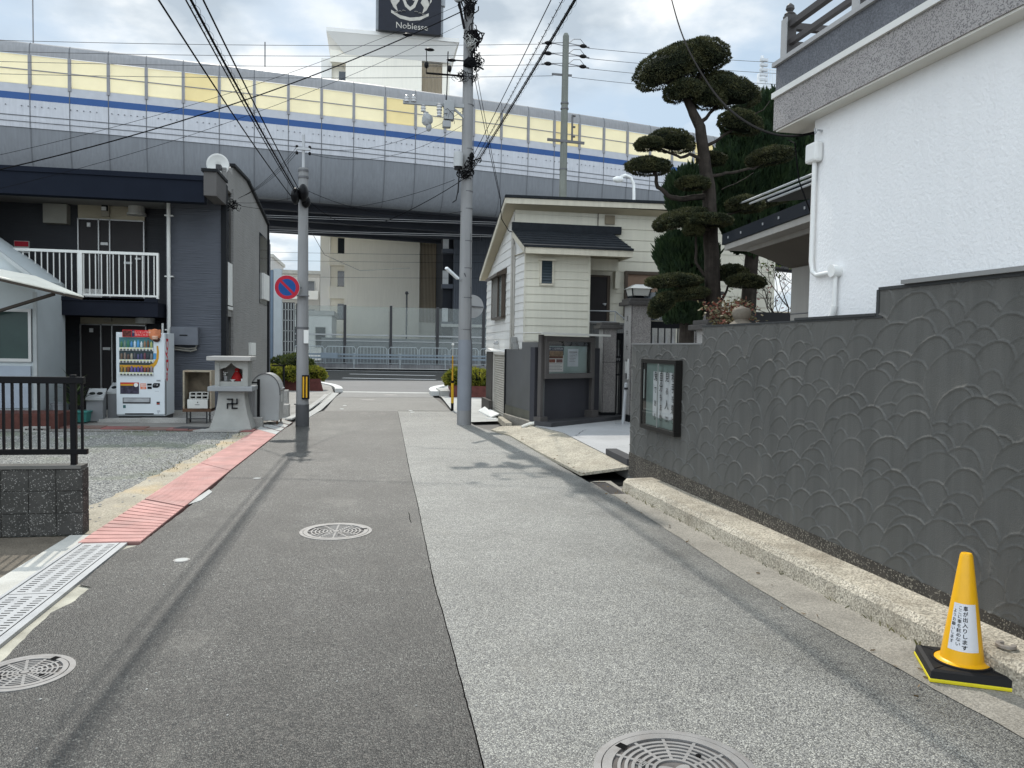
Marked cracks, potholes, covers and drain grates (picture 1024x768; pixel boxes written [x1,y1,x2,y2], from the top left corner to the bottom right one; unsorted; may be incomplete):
manhole cover [299,523,372,540]
manhole cover [0,654,76,692]
manhole cover [594,730,756,768]
drain grate [4,543,127,604]
drain grate [0,593,65,649]
